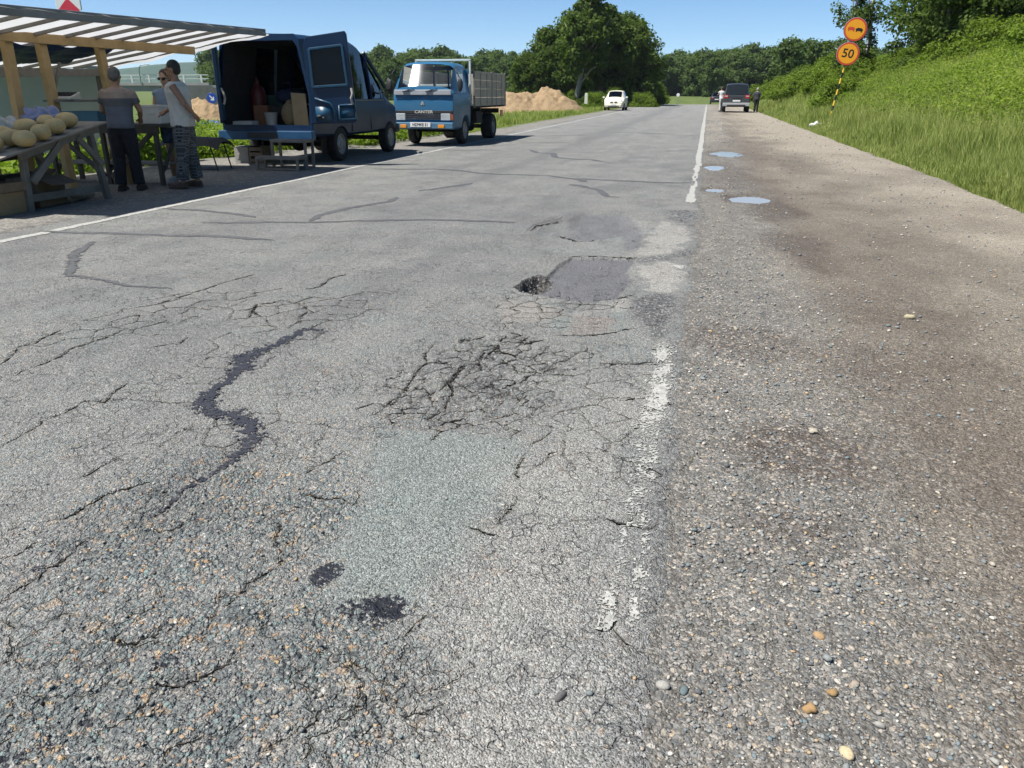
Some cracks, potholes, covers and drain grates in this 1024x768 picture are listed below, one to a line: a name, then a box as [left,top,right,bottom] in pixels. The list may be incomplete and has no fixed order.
crack [571,513,658,530]
crack [261,641,472,768]
crack [357,332,673,524]
crack [598,622,646,654]
crack [0,274,392,376]
crack [0,492,359,763]
crack [2,332,274,446]
pothole [513,275,554,295]
crack [48,460,151,521]
